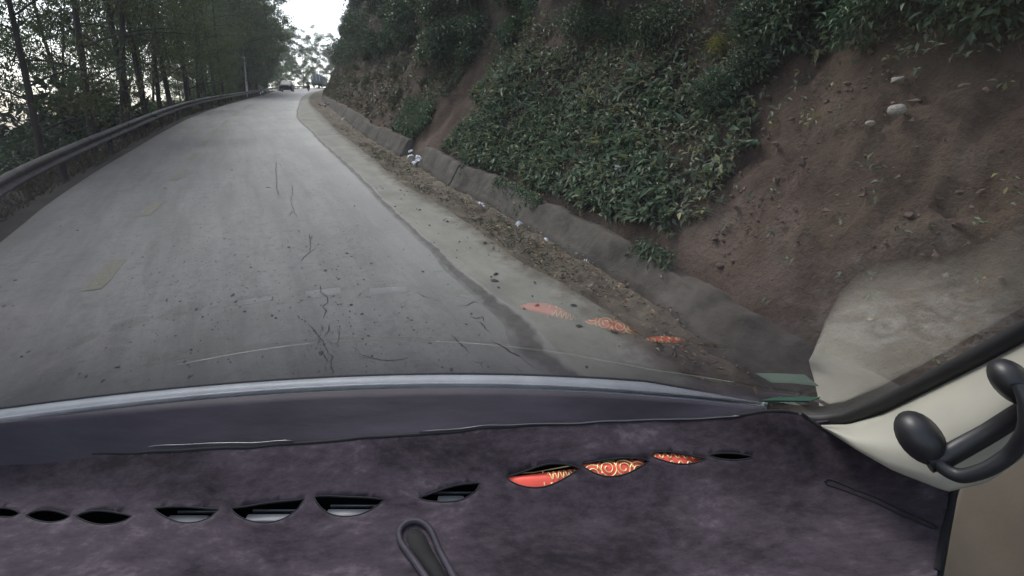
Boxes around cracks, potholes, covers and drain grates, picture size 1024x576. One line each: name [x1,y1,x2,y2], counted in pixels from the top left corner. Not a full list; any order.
crack [302,286,356,349]
crack [451,301,507,349]
